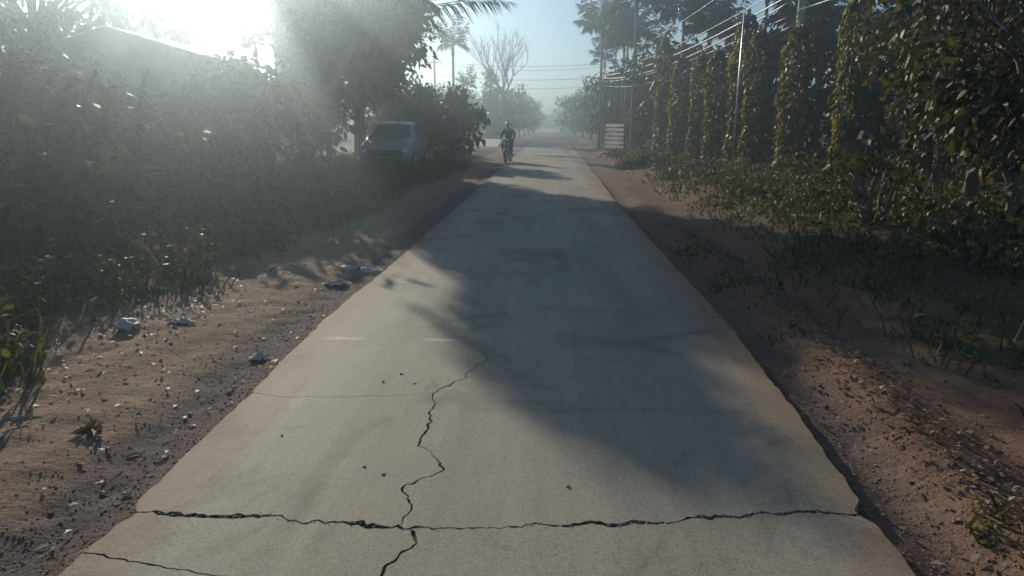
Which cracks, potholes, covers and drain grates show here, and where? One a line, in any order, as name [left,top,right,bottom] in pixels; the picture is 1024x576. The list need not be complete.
crack [93,553,219,576]
crack [139,355,854,576]
